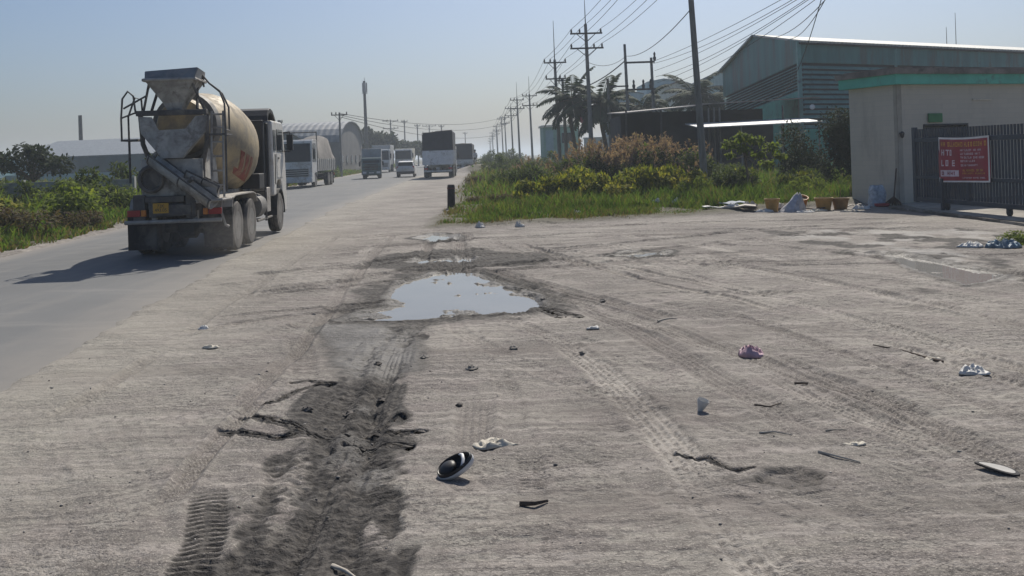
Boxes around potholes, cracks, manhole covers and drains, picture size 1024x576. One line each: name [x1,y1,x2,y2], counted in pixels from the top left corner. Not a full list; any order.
crack [675,453,753,473]
pothole [329,270,553,323]
pothole [866,250,1020,286]
pothole [733,464,843,496]
pothole [408,232,465,242]
crack [216,380,425,457]
